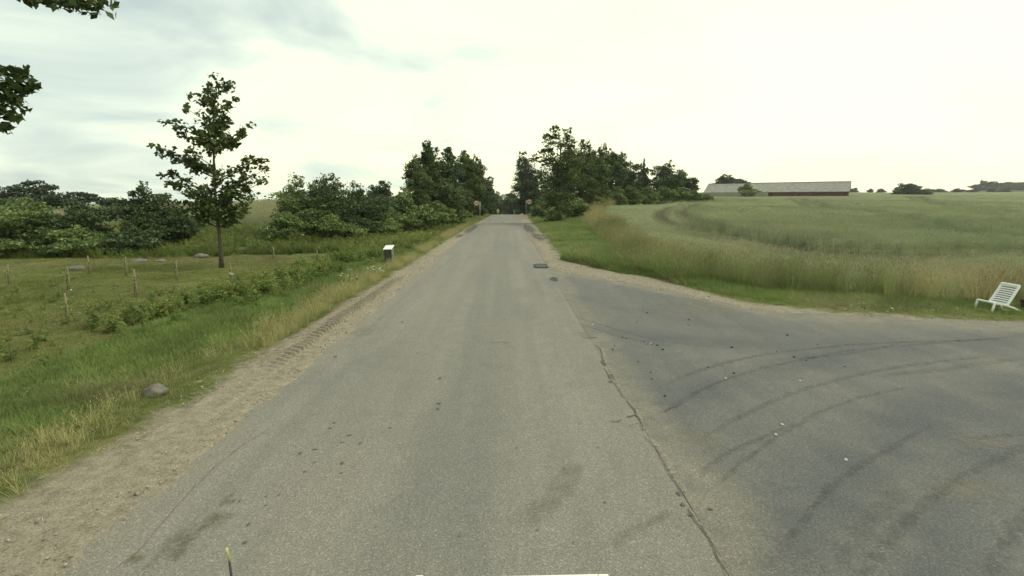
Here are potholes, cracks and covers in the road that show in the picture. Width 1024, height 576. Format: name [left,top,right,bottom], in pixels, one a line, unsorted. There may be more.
crack [610,414,686,495]
